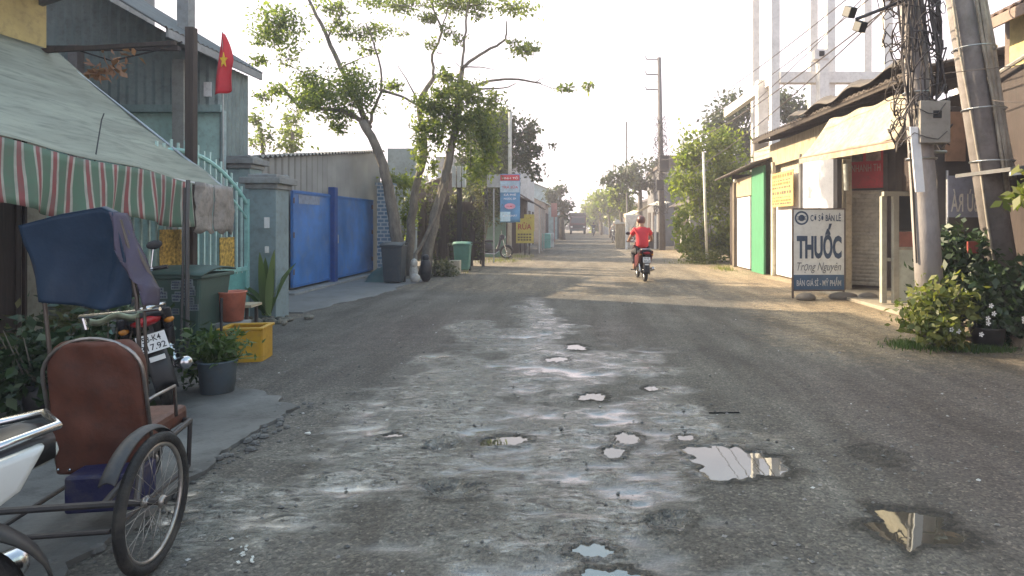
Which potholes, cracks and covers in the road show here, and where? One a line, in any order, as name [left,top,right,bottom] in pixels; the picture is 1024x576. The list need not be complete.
pothole [557,536,629,563]
pothole [608,429,647,447]
pothole [573,391,612,403]
pothole [595,443,633,461]
pothole [375,431,410,440]
pothole [470,433,537,449]
pothole [669,433,701,443]
pothole [639,384,666,392]
pothole [540,355,574,363]
pothole [673,441,799,485]
pothole [562,343,590,351]
pothole [842,442,914,467]
